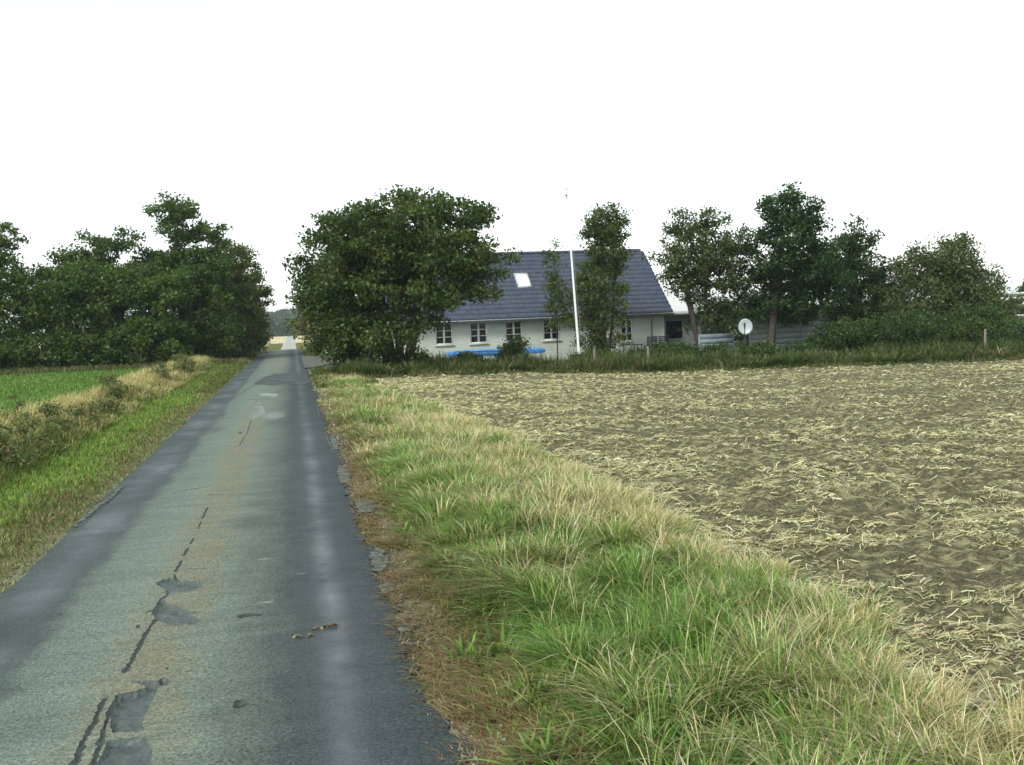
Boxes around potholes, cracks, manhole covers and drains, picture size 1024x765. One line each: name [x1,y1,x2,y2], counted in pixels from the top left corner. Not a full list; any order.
crack [121,486,254,673]
